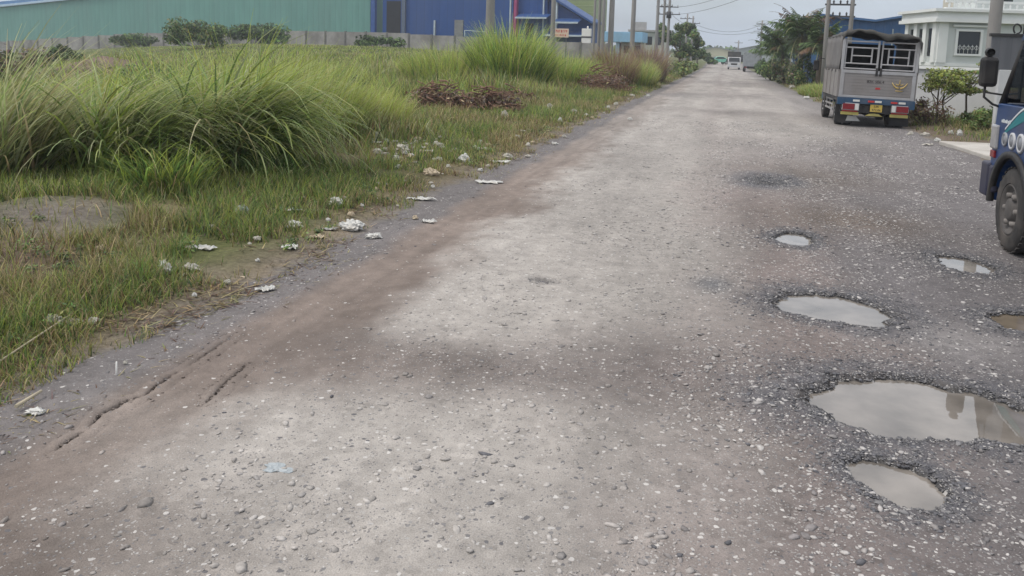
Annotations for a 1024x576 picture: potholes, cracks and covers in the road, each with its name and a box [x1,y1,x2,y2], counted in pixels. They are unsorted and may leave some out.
pothole [763,228,822,249]
pothole [926,251,1010,278]
pothole [753,363,1024,456]
pothole [750,287,919,335]
pothole [823,447,974,523]
pothole [972,308,1024,336]
